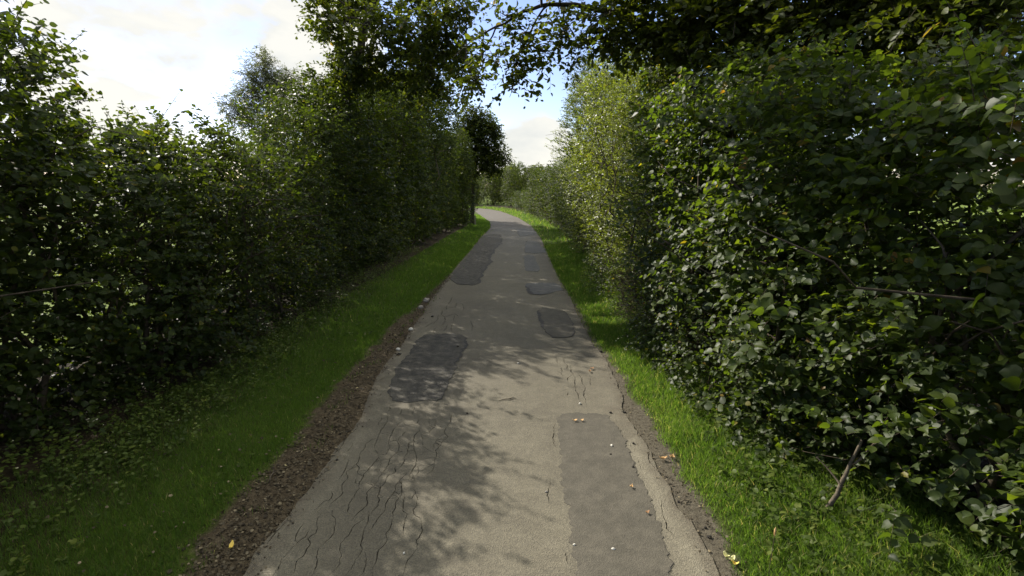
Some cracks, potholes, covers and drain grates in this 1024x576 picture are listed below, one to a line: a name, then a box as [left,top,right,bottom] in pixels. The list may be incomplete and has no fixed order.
crack [278,411,451,573]
